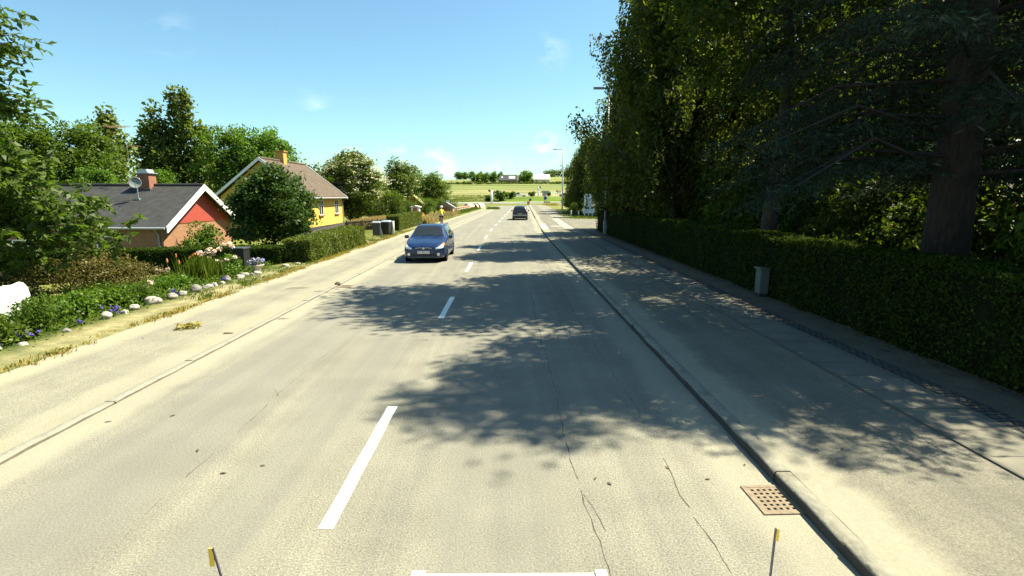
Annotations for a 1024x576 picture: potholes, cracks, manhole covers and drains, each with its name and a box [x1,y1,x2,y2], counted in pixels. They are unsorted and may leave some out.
drain grate [740,485,805,515]
crack [557,282,732,574]
crack [530,293,611,576]
